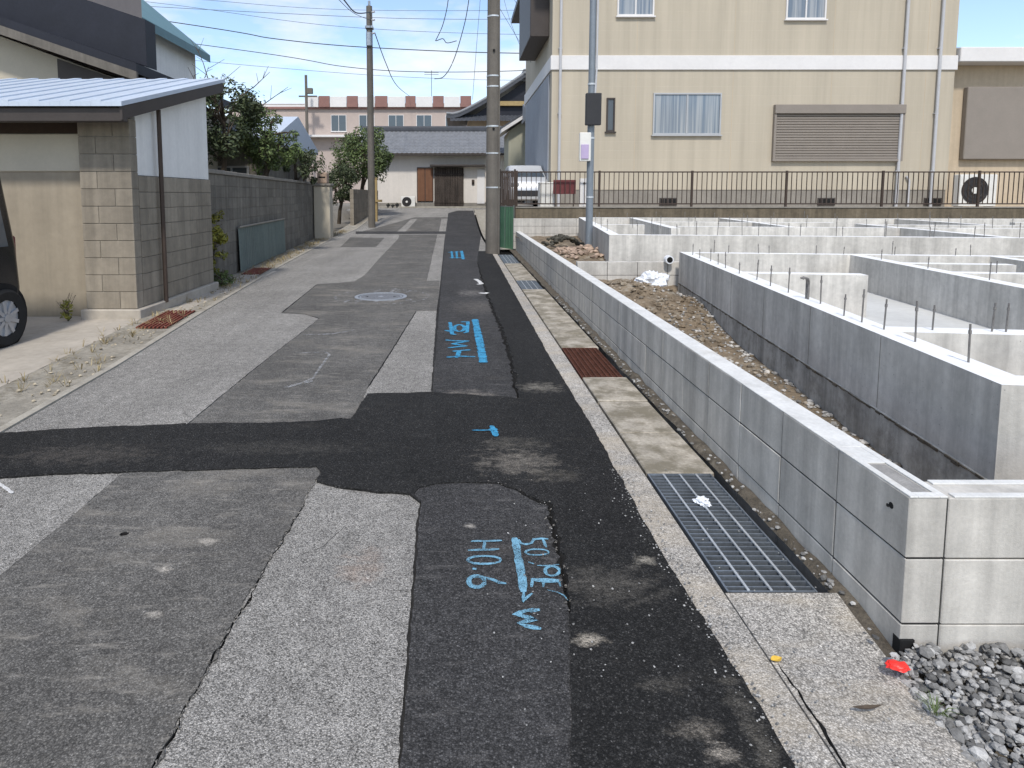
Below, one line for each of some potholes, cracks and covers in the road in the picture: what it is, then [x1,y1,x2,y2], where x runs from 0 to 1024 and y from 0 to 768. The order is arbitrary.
drain grate [562,348,623,380]
drain grate [499,255,519,265]
drain grate [516,280,543,290]
drain grate [647,474,818,594]
drain grate [136,310,195,329]
manhole cover [355,292,407,301]
crack [779,666,846,768]
